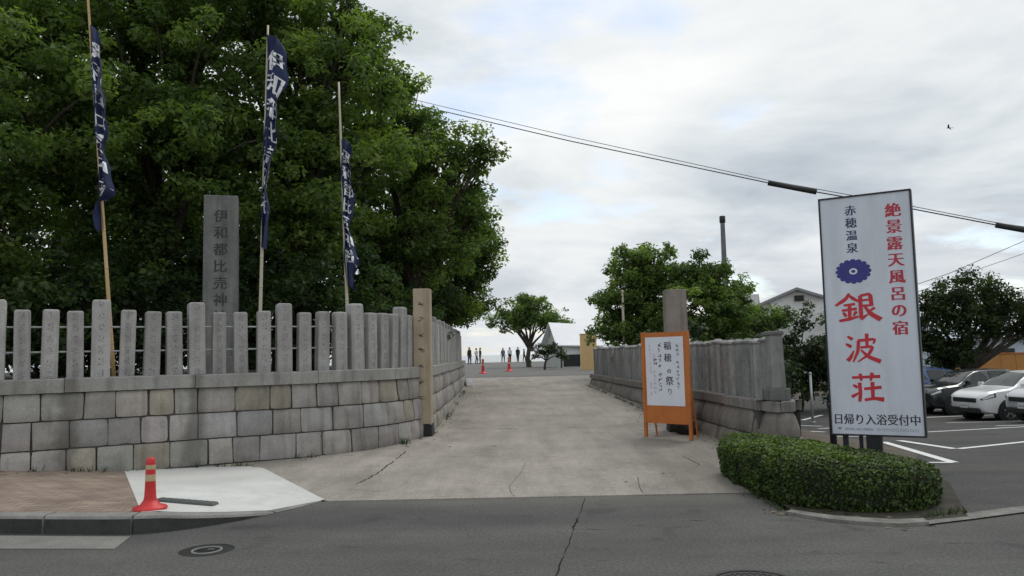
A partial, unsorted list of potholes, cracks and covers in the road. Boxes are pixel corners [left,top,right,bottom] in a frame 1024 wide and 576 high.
manhole cover [178,544,235,557]
crack [555,499,596,576]
